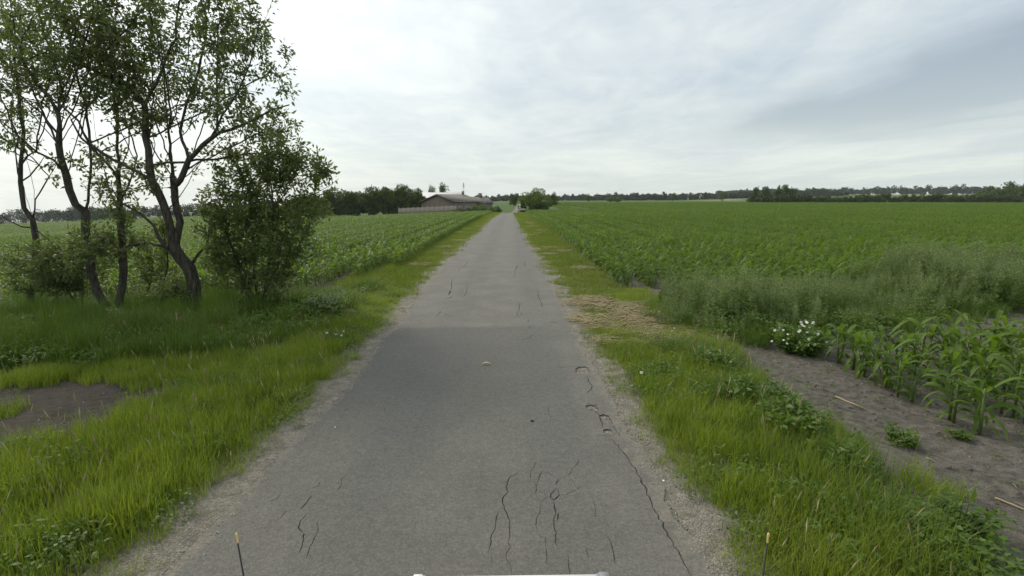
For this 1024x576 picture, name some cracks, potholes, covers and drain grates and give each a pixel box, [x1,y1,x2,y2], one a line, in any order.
crack [487,460,596,576]
crack [270,482,323,560]
crack [545,366,691,575]
